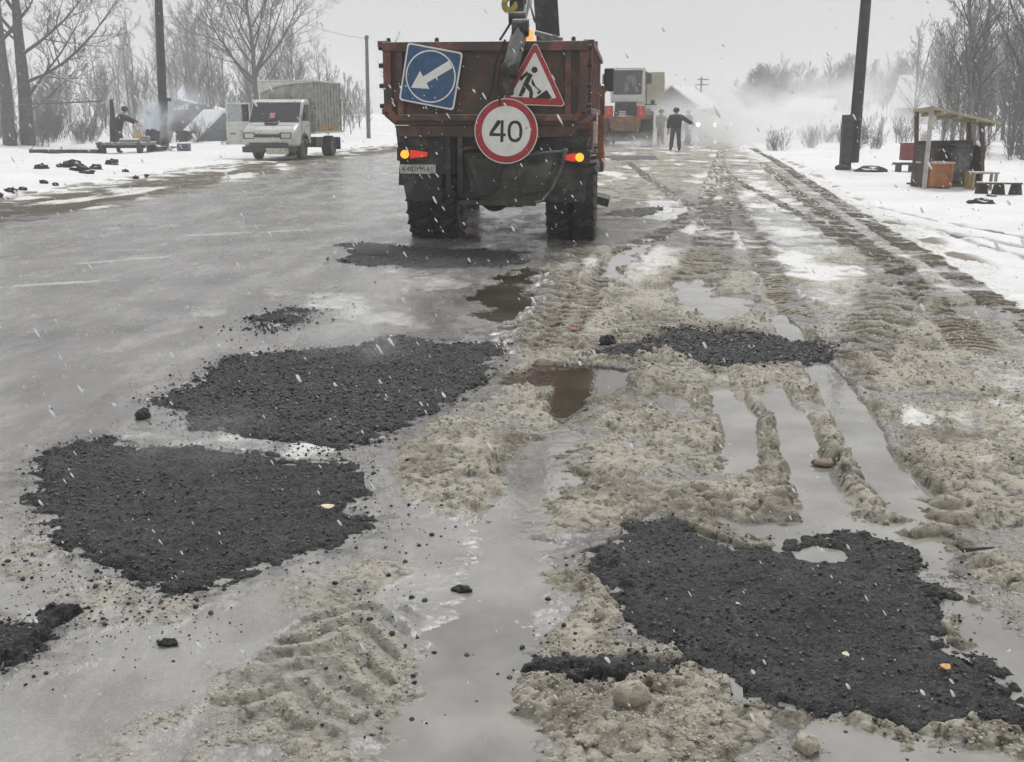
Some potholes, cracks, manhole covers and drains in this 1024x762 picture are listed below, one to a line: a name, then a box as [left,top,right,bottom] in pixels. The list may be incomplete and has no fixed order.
pothole [495,363,640,425]
pothole [459,267,554,323]
